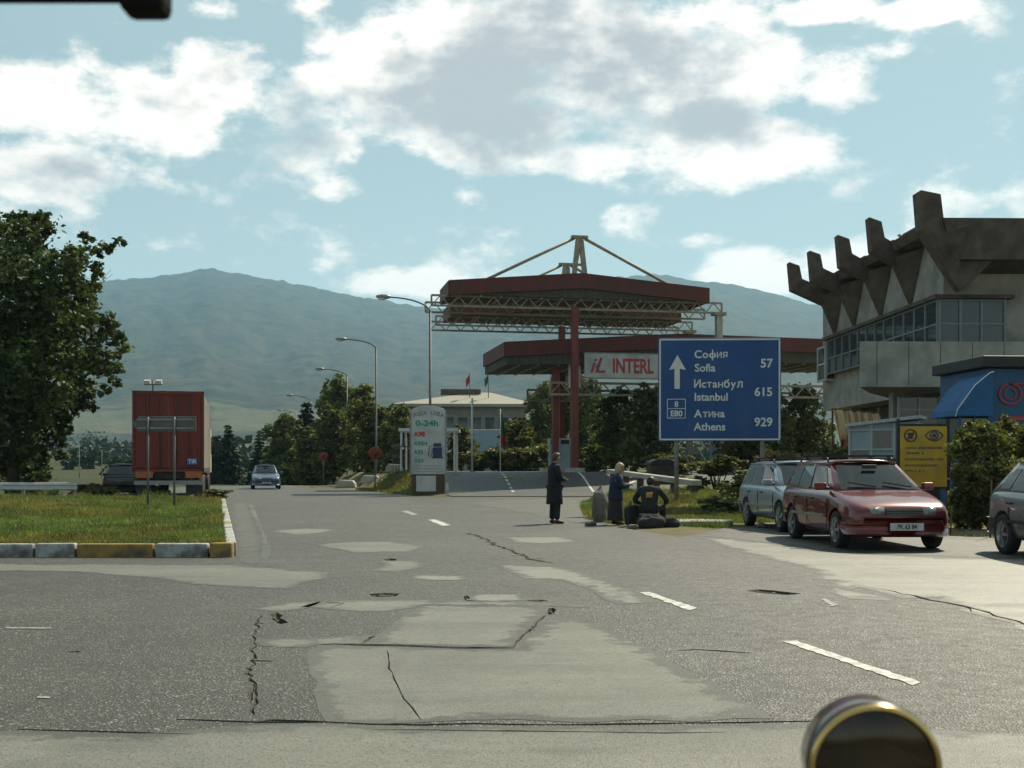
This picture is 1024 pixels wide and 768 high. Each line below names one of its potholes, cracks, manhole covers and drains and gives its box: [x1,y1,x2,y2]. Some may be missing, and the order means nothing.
crack [18,615,811,734]
crack [467,533,550,563]
pothole [270,612,288,624]
crack [883,589,1024,625]
